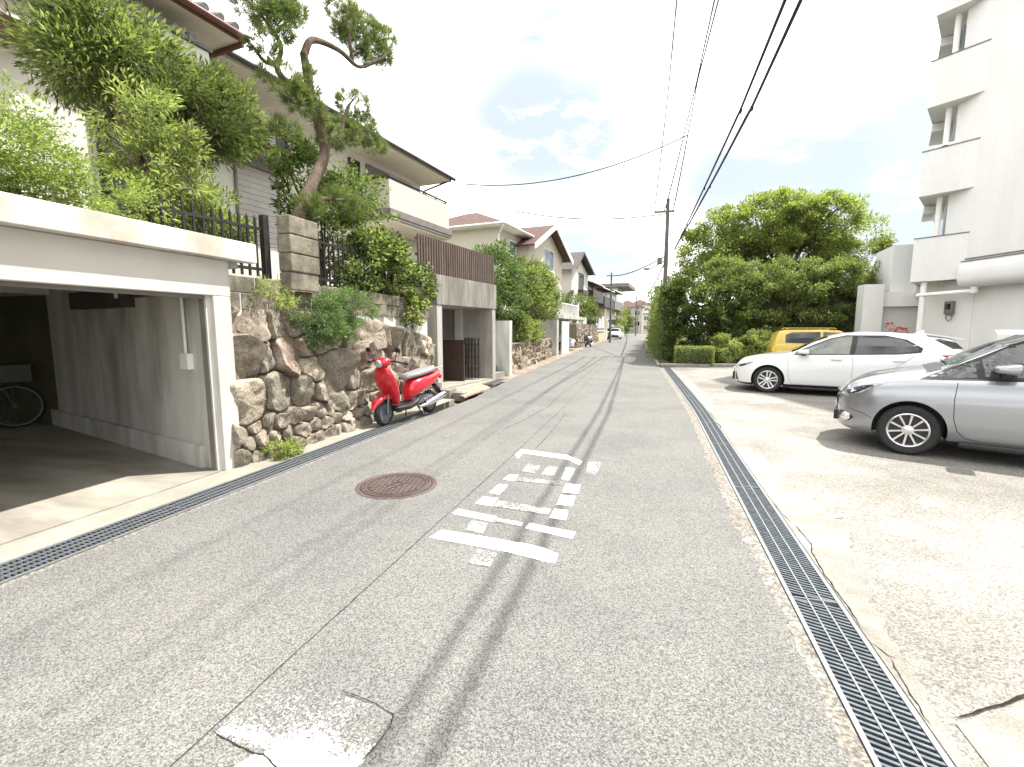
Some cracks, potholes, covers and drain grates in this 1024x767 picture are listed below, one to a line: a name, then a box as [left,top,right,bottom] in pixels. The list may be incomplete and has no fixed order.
drain grate [683,395,707,411]
drain grate [732,485,841,608]
manhole cover [355,472,437,500]
drain grate [788,596,955,767]
drain grate [710,443,762,490]
drain grate [693,409,716,423]
crack [872,643,1024,725]
drain grate [676,385,694,396]
drain grate [699,421,731,445]
crack [774,503,860,625]
